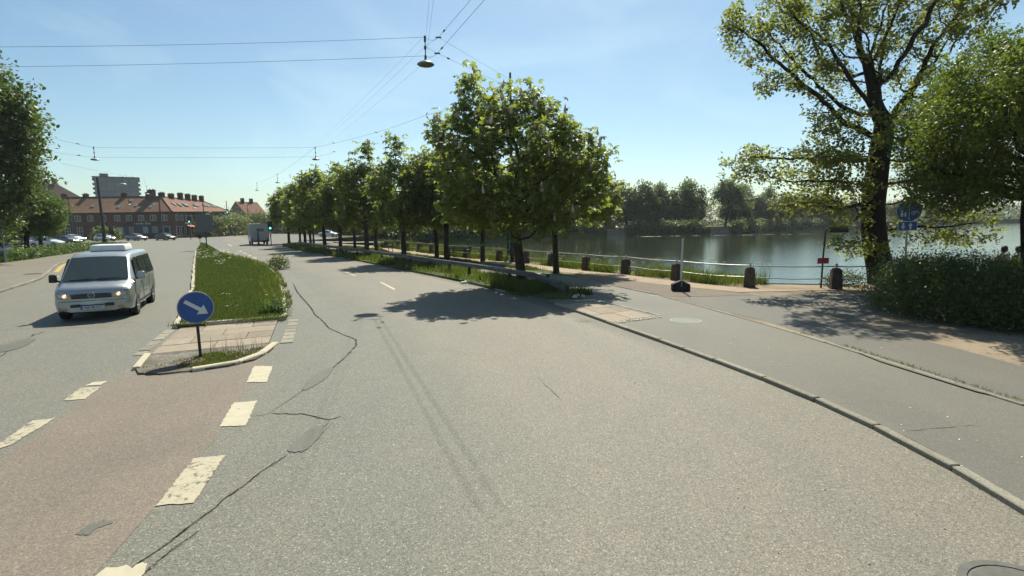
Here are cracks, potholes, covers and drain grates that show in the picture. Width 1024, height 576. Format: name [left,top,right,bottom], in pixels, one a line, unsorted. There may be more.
crack [131,283,357,572]
manhole cover [957,560,1024,576]
